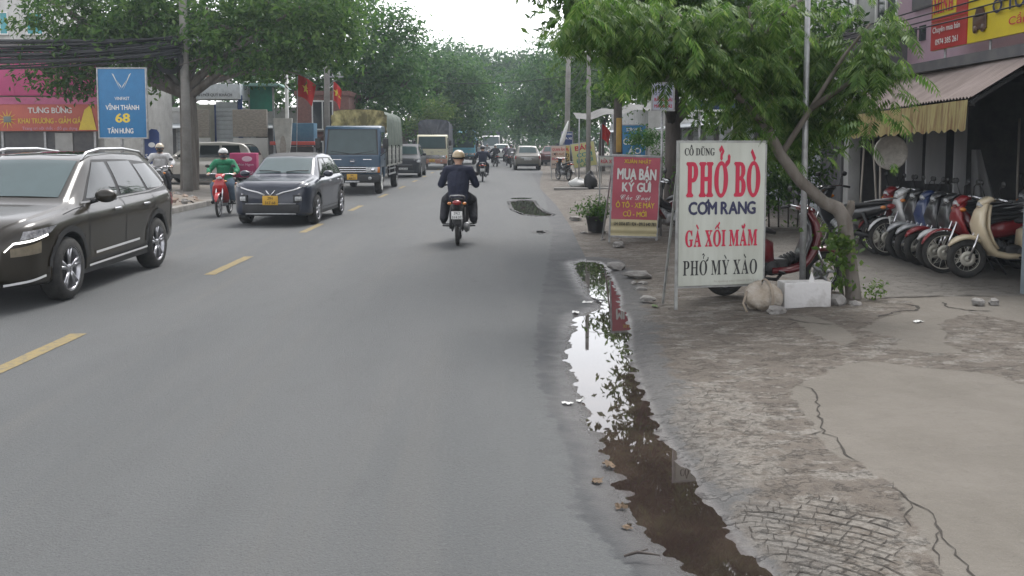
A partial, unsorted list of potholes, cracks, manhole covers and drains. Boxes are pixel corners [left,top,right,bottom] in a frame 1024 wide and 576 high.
pothole [508,200,553,216]
crack [799,385,855,460]
crack [870,295,985,316]
crack [735,488,975,576]
